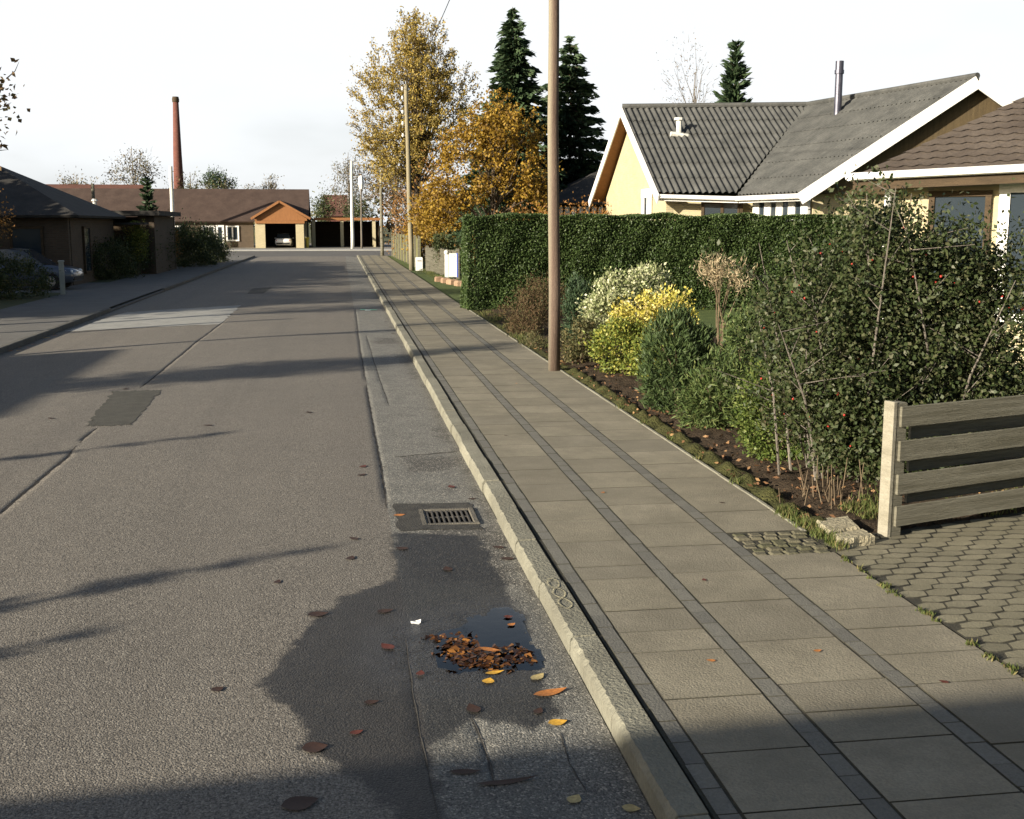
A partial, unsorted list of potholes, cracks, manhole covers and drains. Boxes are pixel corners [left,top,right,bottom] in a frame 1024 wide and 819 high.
crack [560,734,586,790]
crack [471,718,495,789]
drain grate [418,507,480,525]
